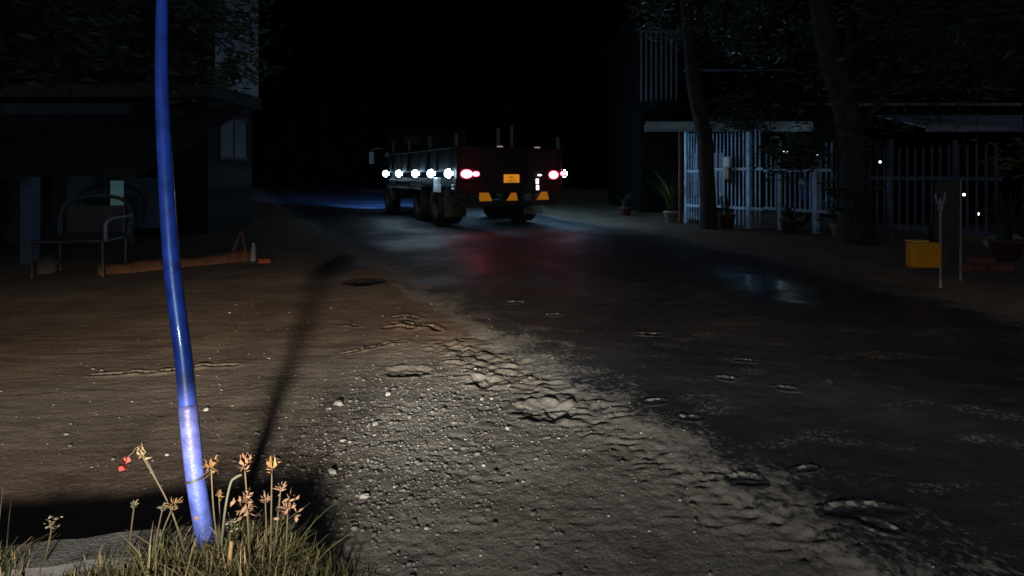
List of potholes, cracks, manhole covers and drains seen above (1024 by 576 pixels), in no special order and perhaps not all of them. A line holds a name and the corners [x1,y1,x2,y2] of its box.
pothole [641,398,672,407]
pothole [375,365,439,379]
pothole [722,471,771,489]
pothole [770,385,803,393]
pothole [857,517,908,538]
crack [94,364,229,376]
pothole [814,500,916,524]
pothole [674,414,707,423]
pothole [340,278,388,287]
pothole [792,464,822,475]
crack [345,314,437,354]
